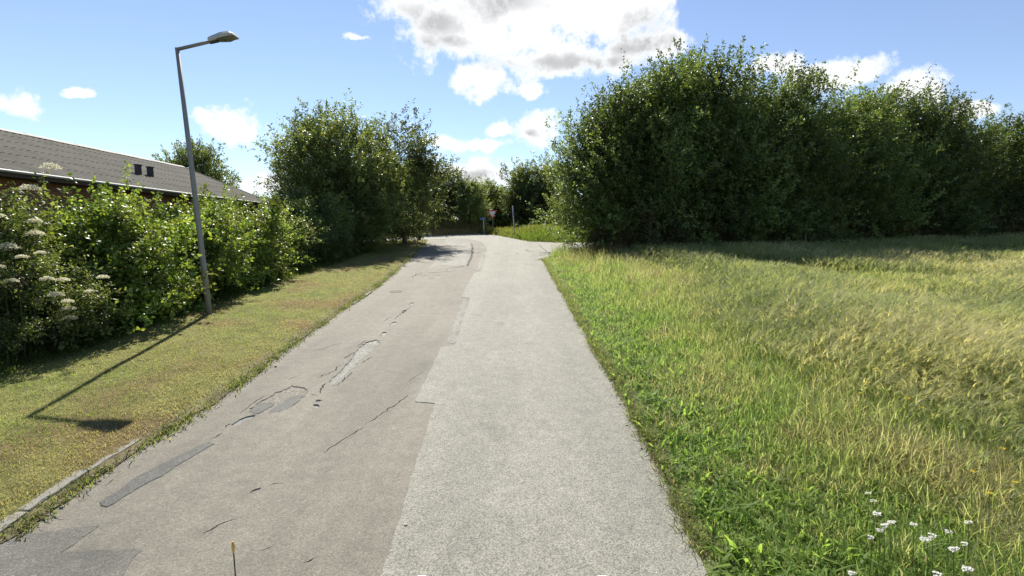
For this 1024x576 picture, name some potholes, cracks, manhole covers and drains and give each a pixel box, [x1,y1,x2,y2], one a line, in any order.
crack [324,378,413,453]
pothole [249,385,308,414]
pothole [328,340,381,384]
